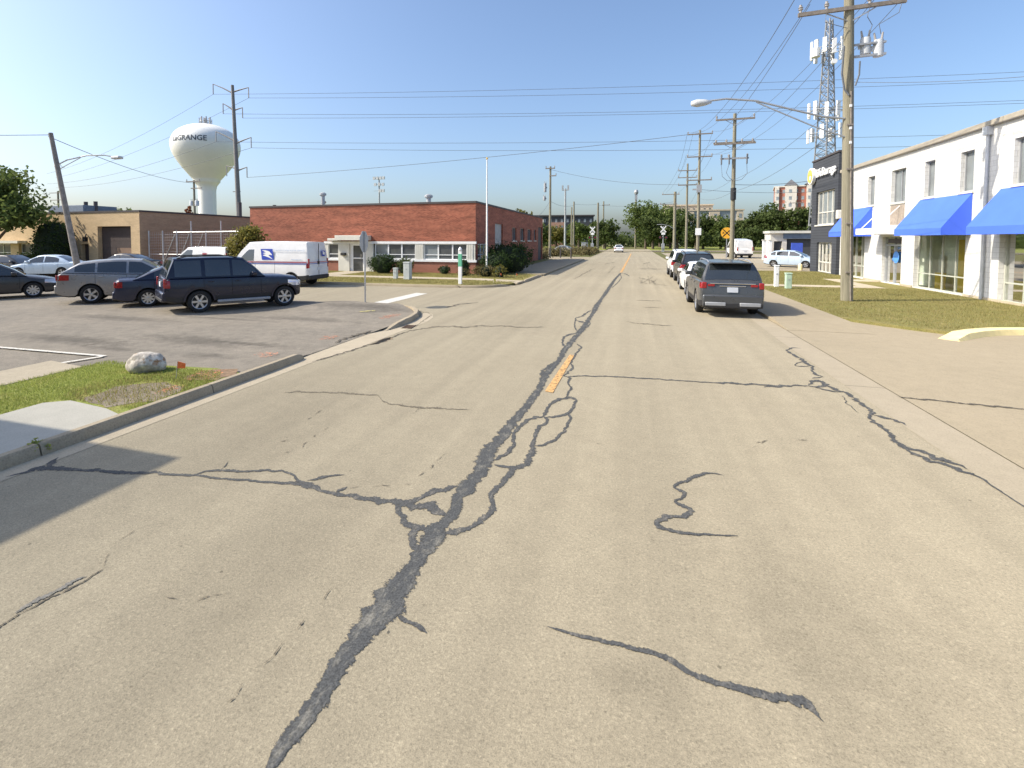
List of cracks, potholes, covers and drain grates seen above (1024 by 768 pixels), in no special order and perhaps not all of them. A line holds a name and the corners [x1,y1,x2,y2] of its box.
crack [898,396,1023,409]
crack [402,312,528,333]
crack [284,390,470,453]
crack [0,530,134,626]
